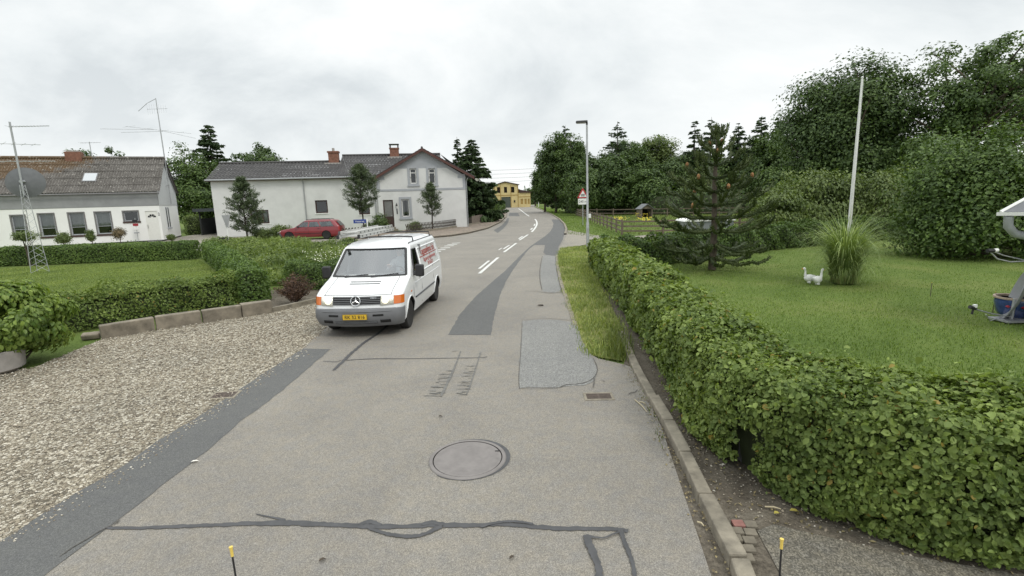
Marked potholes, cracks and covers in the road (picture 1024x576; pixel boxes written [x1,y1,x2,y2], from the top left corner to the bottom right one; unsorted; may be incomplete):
manhole cover [429,439,510,480]
drain grate [206,390,242,401]
drain grate [583,392,615,401]
